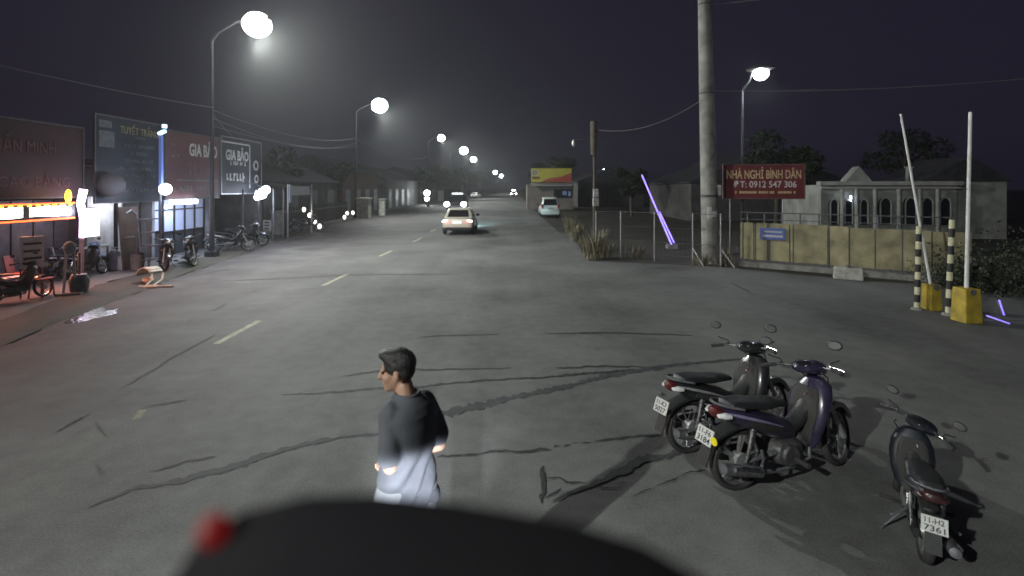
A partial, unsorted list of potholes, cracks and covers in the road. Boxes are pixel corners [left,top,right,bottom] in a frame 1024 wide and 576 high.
crack [437,434,702,503]
crack [281,332,692,395]
crack [122,290,257,387]
crack [53,413,107,437]
